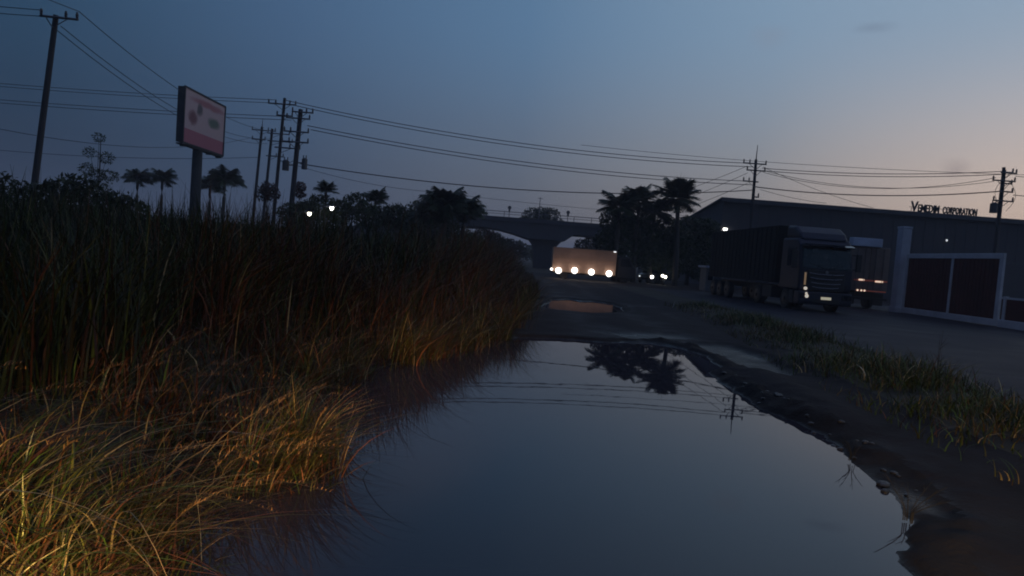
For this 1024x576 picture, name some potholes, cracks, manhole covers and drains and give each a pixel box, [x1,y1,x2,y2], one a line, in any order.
pothole [533,297,632,313]
pothole [65,332,988,576]
